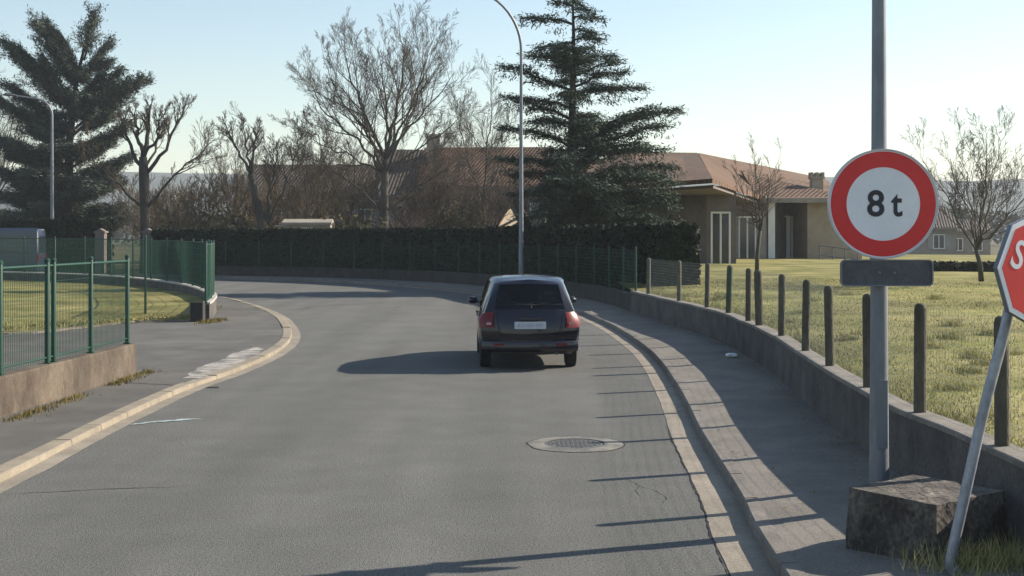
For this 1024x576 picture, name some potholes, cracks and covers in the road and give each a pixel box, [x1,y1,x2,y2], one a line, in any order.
manhole cover [526,436,625,452]
crack [628,427,731,576]
